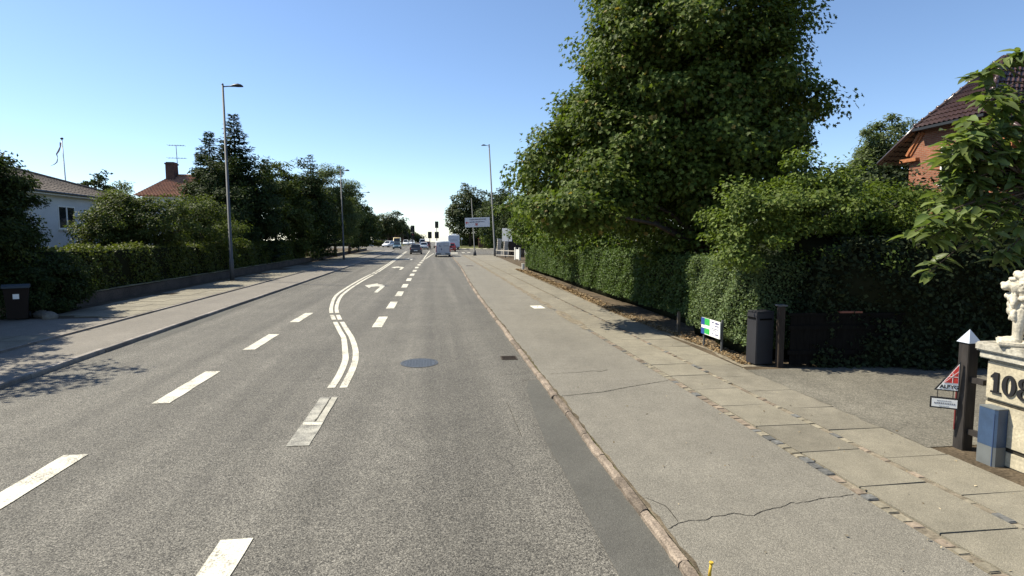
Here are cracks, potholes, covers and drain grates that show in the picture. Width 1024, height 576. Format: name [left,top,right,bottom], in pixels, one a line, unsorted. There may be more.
crack [650,494,853,529]
manhole cover [400,358,438,367]
